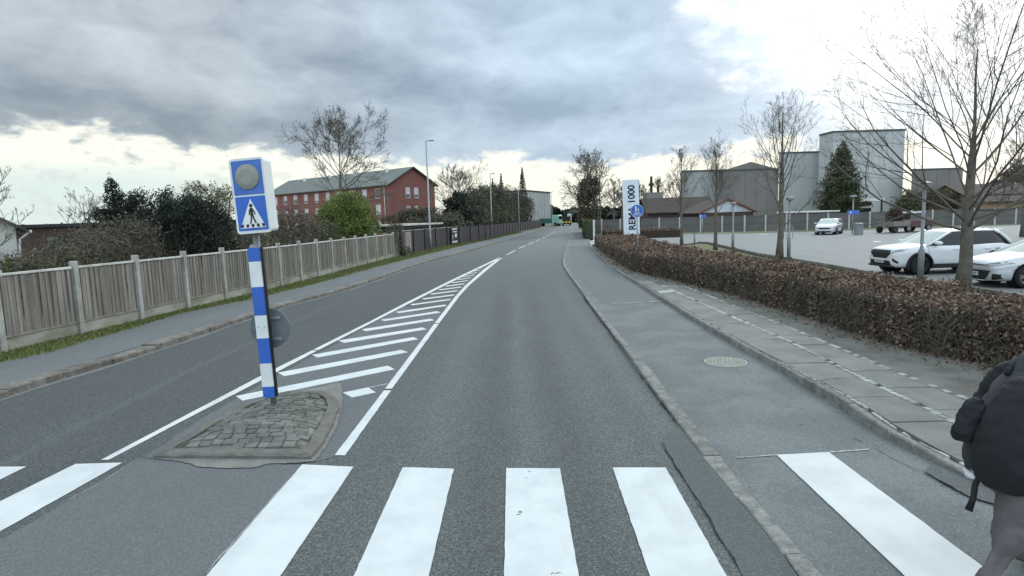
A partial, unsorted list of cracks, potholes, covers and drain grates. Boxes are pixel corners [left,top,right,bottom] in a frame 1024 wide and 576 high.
manhole cover [704,357,747,367]
